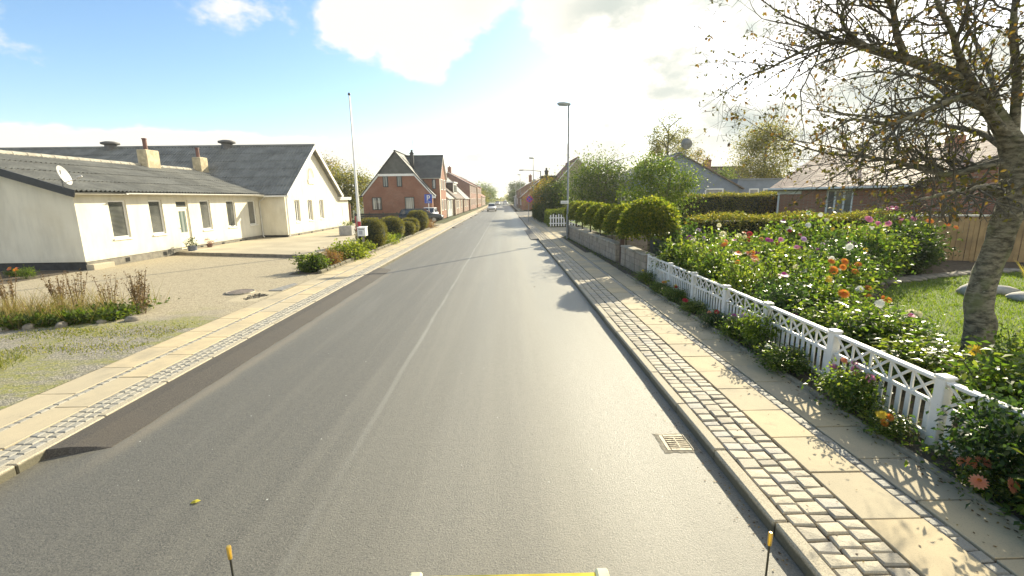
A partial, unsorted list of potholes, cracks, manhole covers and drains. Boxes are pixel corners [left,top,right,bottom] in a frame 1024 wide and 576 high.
drain grate [652,433,703,453]
